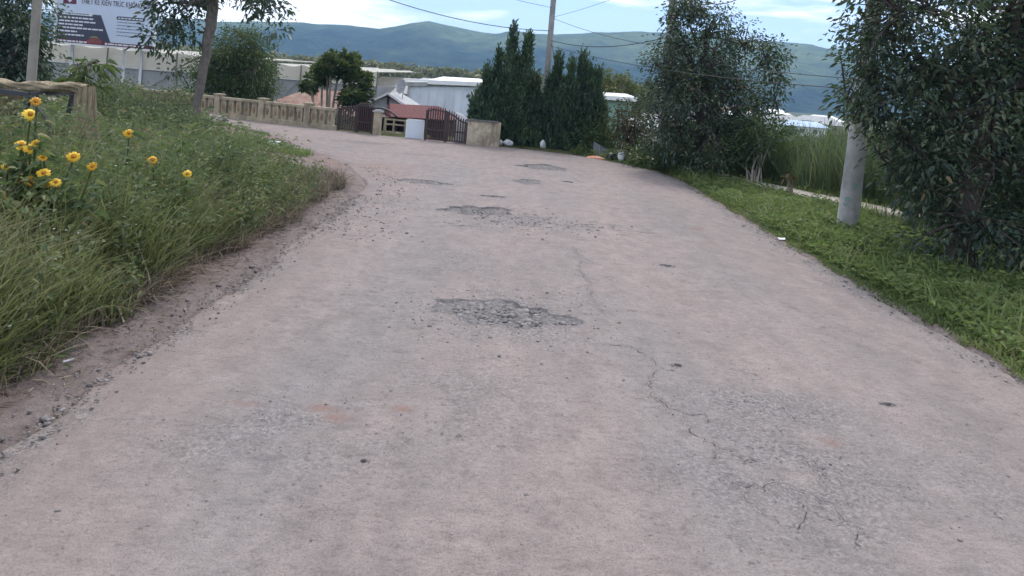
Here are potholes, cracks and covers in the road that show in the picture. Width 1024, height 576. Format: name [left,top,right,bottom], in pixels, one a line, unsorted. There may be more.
crack [583,343,870,551]
pothole [425,298,590,332]
pothole [512,163,568,171]
pothole [394,178,457,186]
pothole [432,205,516,217]
crack [571,224,654,318]
